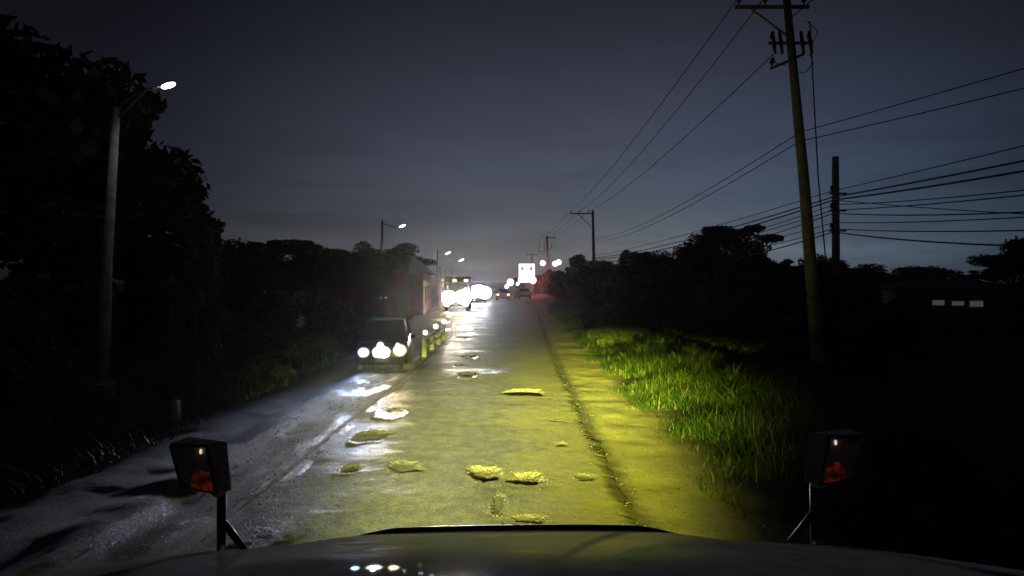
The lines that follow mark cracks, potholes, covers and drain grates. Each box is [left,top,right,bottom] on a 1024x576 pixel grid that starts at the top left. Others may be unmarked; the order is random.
pothole [485,491,513,517]
pothole [497,388,549,398]
pothole [569,472,603,483]
pothole [334,462,365,475]
pothole [502,511,555,525]
pothole [381,458,431,476]
pothole [498,470,552,487]
pothole [346,429,403,443]
pothole [371,407,412,420]
pothole [460,463,514,484]
